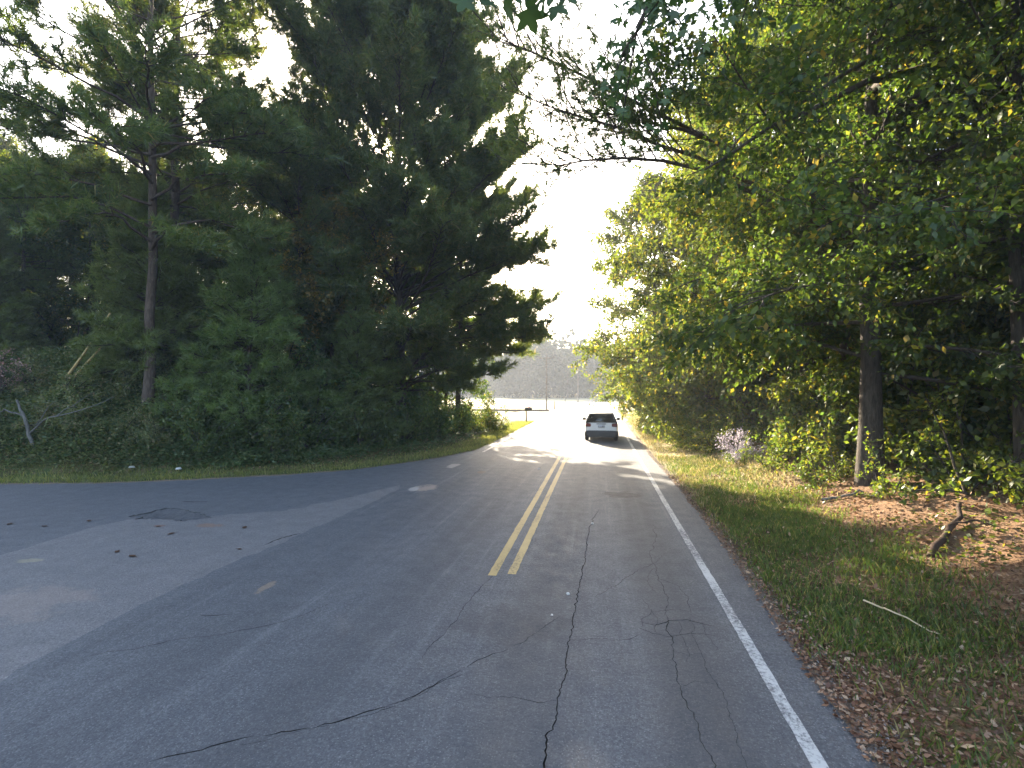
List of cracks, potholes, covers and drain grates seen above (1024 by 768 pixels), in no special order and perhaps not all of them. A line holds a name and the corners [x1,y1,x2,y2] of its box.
pothole [129,508,211,521]
crack [150,513,636,768]
crack [597,541,747,768]
crack [90,603,330,656]
